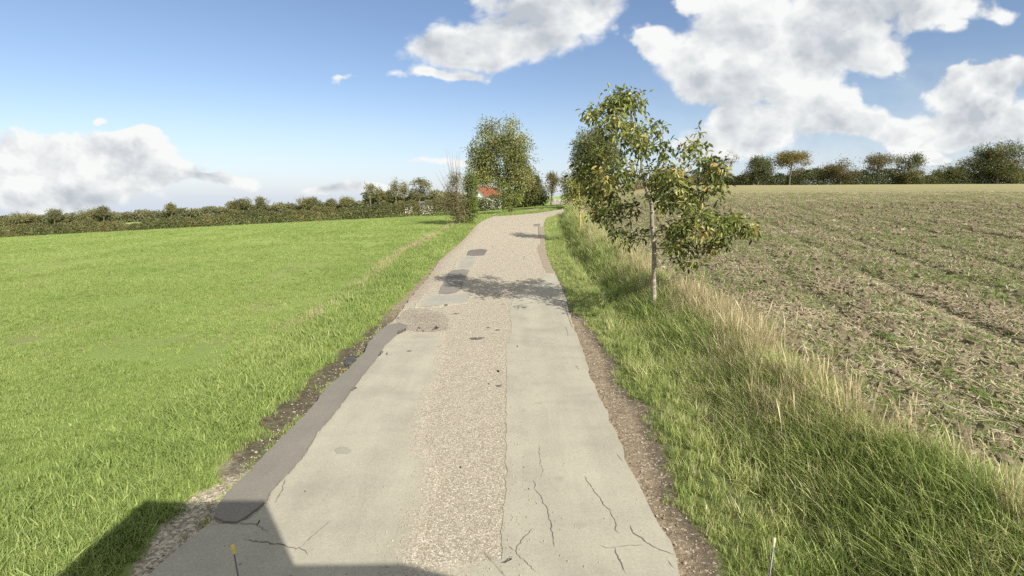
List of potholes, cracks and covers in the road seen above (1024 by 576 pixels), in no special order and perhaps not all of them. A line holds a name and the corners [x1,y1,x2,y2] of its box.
crack [247,526,324,555]
crack [586,480,671,573]
